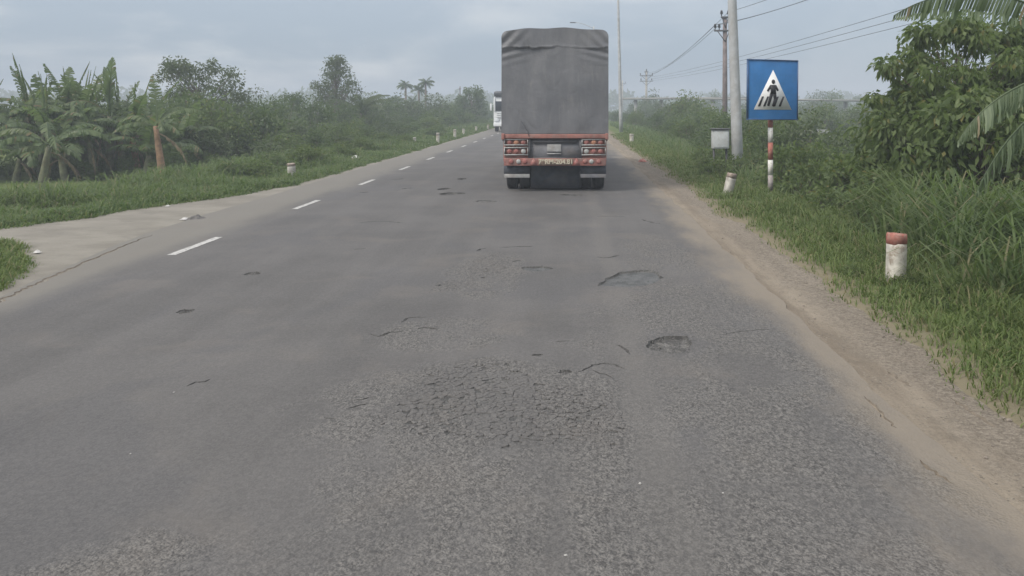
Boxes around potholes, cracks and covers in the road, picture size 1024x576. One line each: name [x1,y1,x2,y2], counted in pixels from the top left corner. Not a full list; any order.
crack [325,341,634,452]
crack [864,371,911,428]
crack [371,317,438,337]
pothole [646,336,698,355]
pothole [598,270,664,287]
